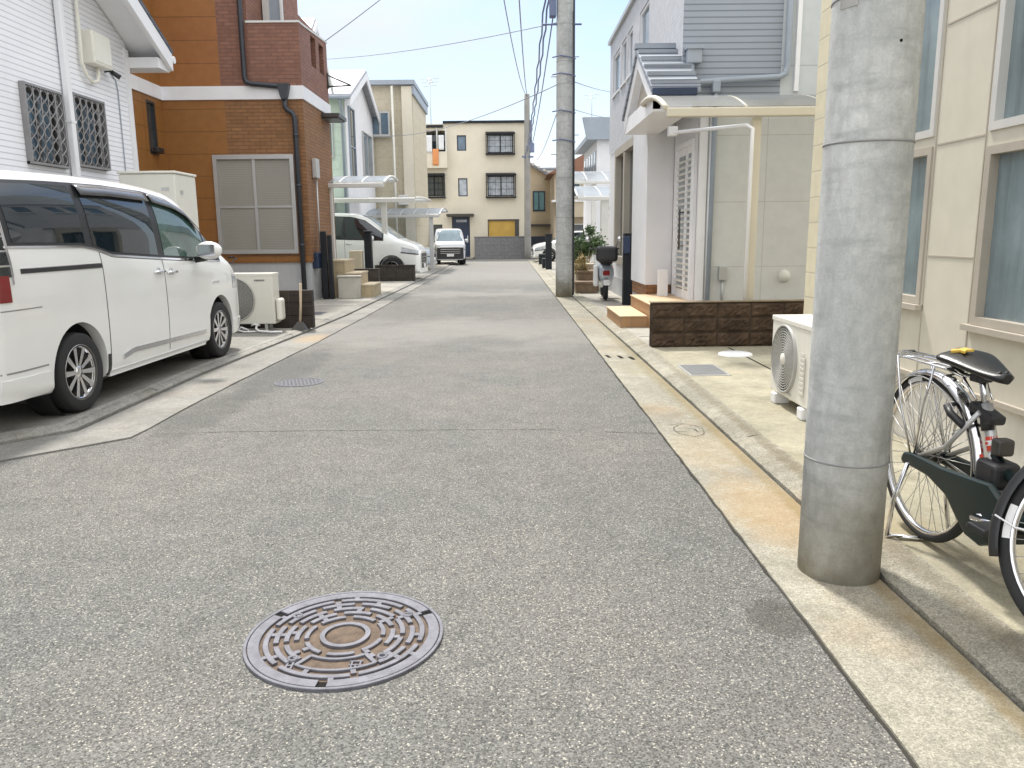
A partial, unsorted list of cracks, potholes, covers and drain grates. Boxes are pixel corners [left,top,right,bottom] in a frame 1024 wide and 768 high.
manhole cover [274,378,324,387]
drain grate [676,364,731,376]
manhole cover [242,591,443,692]
